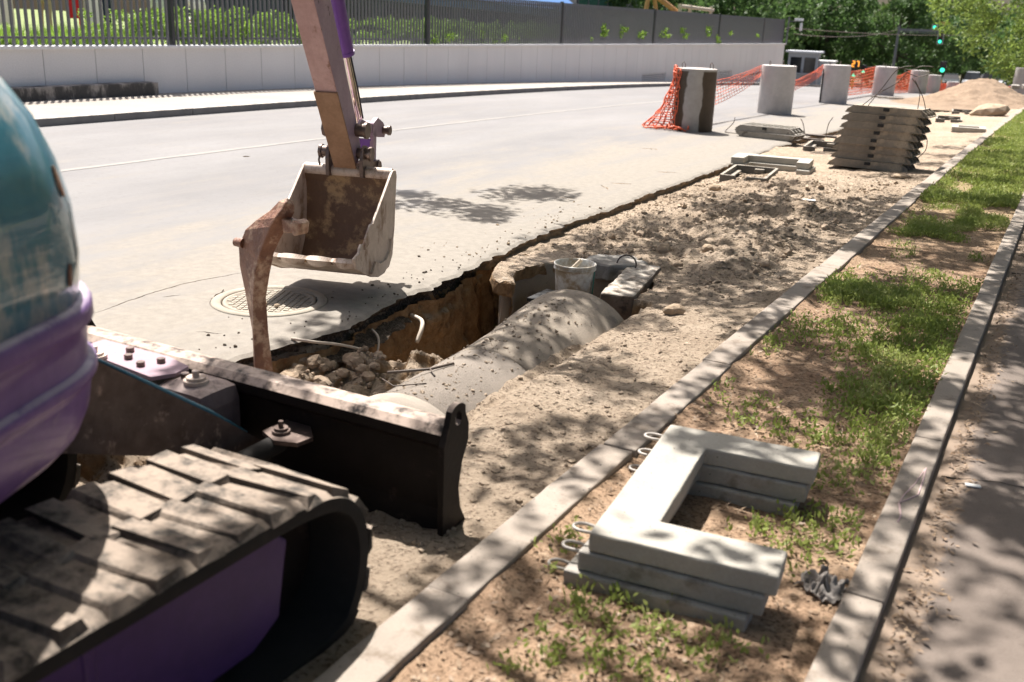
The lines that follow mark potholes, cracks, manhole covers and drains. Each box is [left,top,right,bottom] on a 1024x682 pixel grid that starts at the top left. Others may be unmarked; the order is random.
manhole cover [210,285,328,317]
